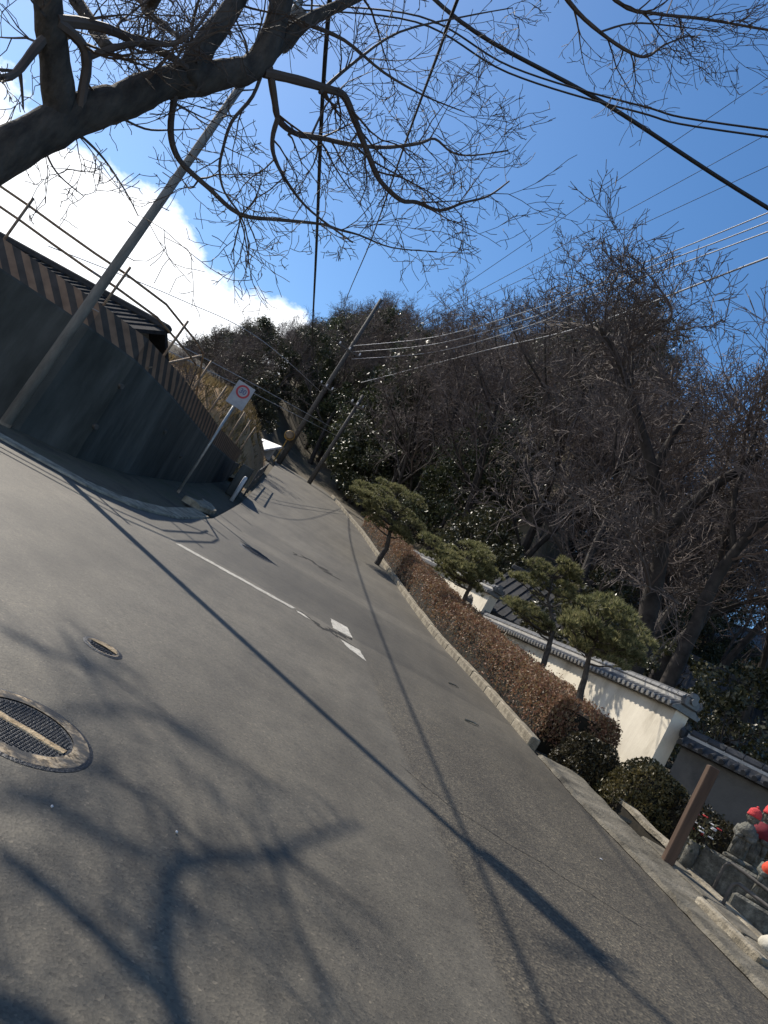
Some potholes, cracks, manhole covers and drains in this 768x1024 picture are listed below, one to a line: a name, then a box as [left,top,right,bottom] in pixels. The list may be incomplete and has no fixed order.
manhole cover [0,688,93,772]
manhole cover [83,636,122,659]
